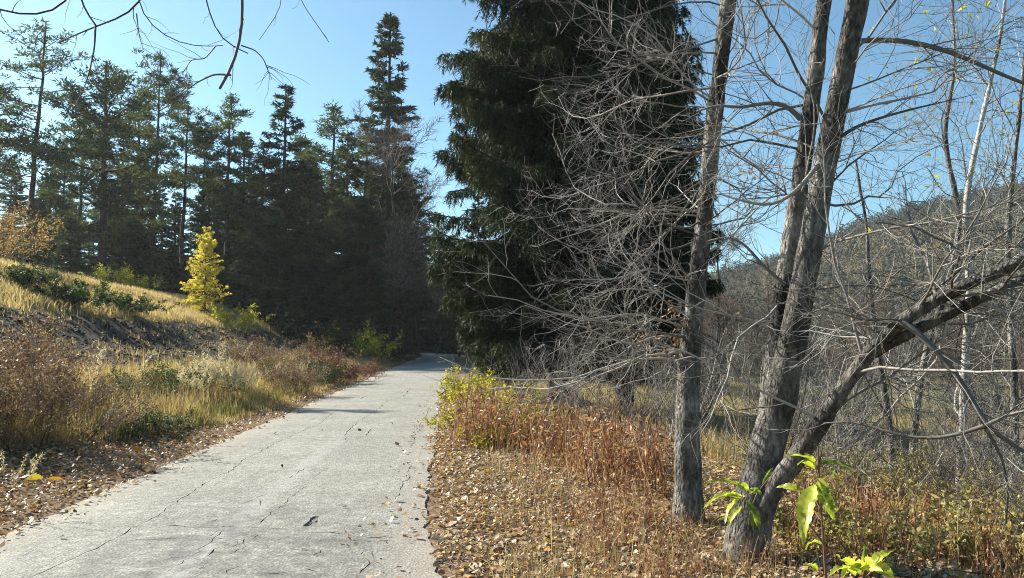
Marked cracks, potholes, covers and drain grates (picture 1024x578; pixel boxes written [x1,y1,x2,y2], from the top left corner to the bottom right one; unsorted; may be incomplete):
crack [21,408,420,577]
crack [338,388,428,504]
